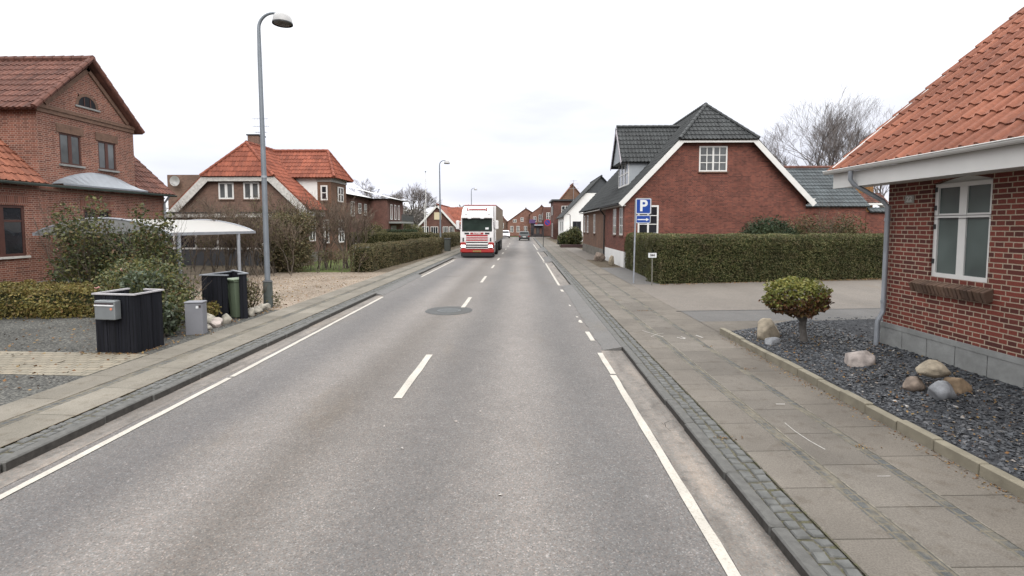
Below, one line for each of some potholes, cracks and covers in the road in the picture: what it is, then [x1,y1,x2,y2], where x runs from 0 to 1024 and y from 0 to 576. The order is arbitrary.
manhole cover [425,306,472,315]
